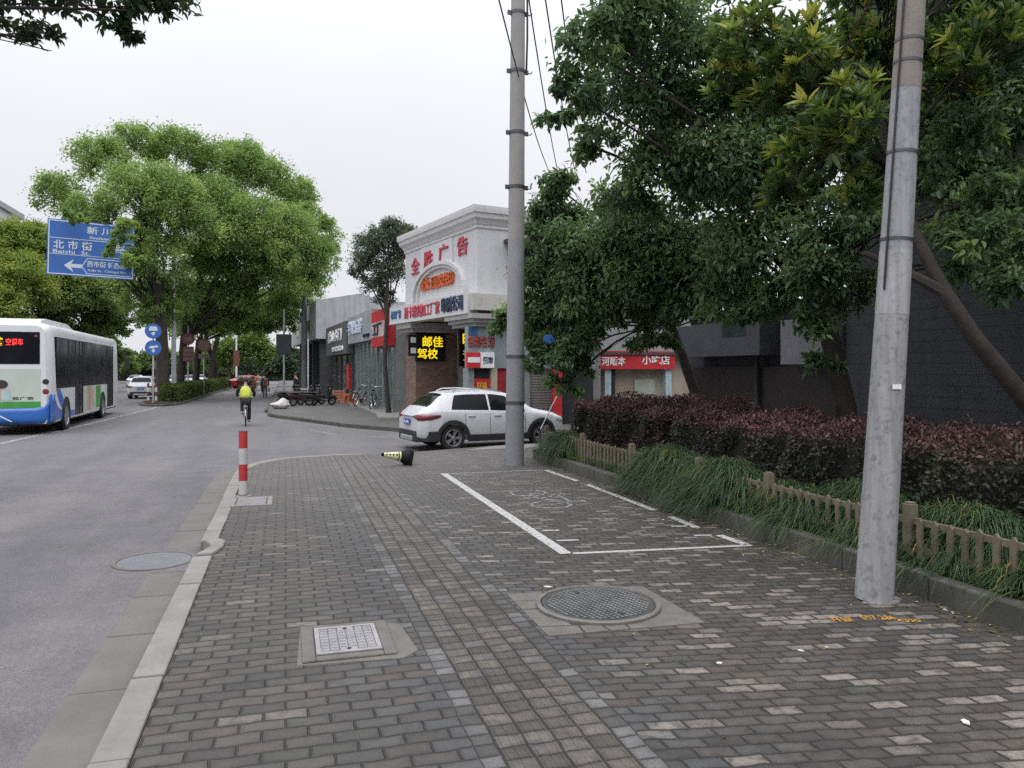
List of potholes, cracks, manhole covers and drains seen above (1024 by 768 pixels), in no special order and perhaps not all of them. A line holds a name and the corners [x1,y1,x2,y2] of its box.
manhole cover [507,585,705,637]
manhole cover [111,551,196,571]
utility cover [229,496,273,508]
utility cover [297,620,418,666]
